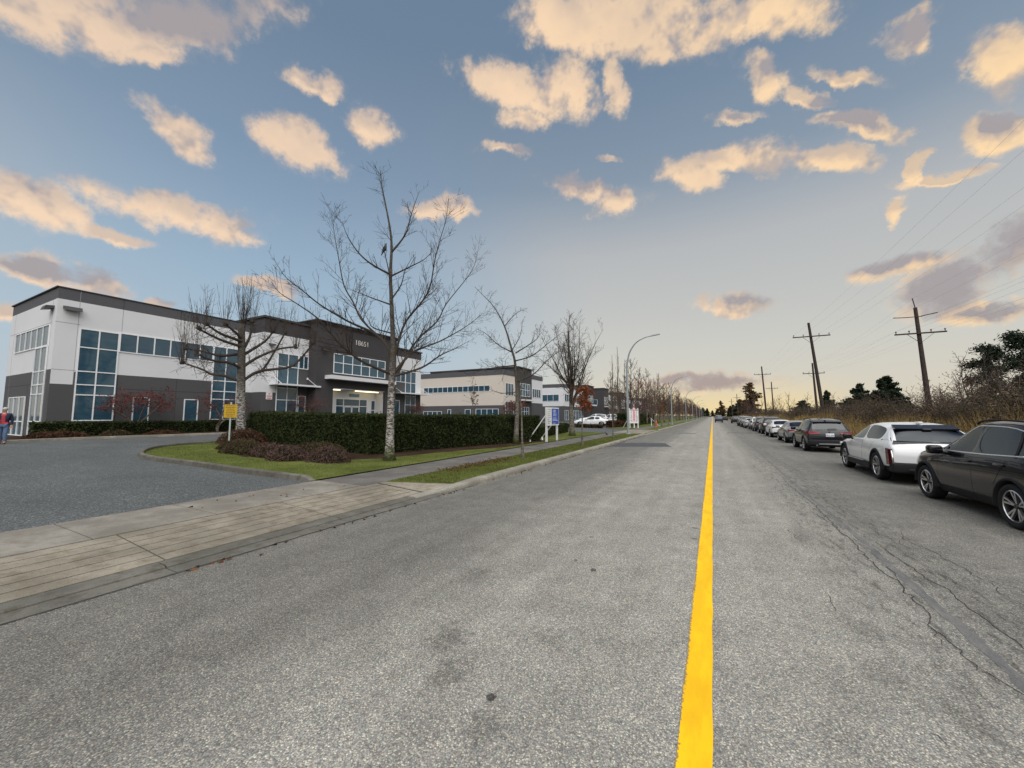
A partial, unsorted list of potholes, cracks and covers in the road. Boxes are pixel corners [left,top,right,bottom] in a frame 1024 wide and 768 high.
crack [776,472,1024,695]
